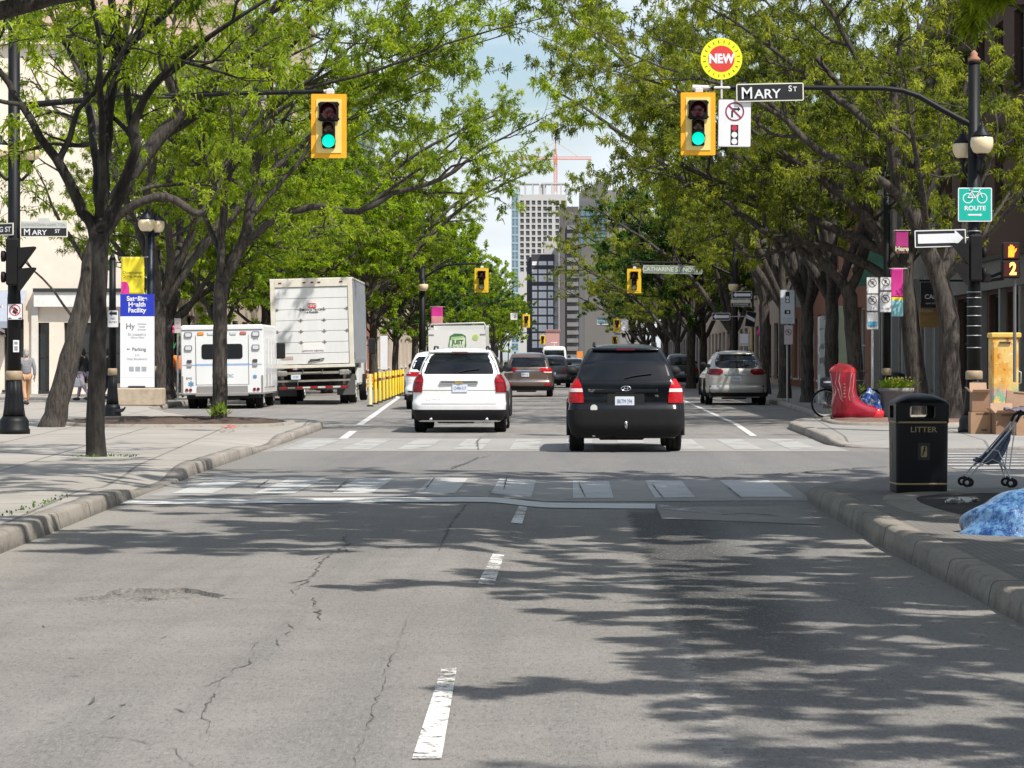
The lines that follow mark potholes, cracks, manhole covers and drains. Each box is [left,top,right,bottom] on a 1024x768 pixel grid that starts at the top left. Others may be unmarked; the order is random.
crack [290,534,351,620]
pothole [49,586,250,606]
crack [199,622,293,739]
